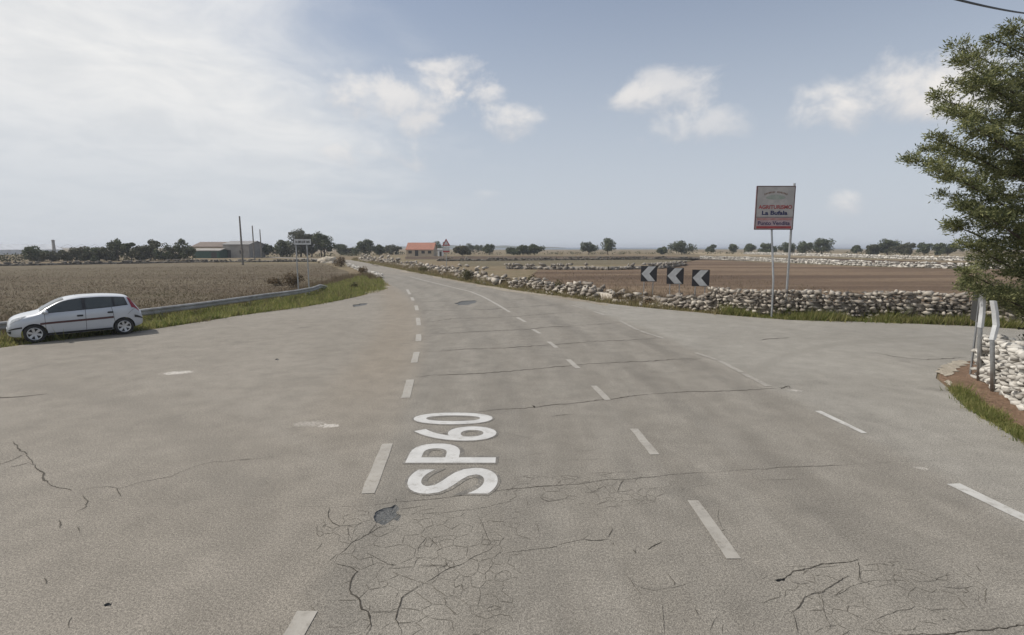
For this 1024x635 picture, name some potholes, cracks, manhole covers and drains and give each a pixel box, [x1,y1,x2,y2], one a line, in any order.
crack [4,441,273,627]
crack [898,624,1024,635]
pothole [374,505,401,525]
crack [304,432,930,635]
crack [488,386,790,416]
